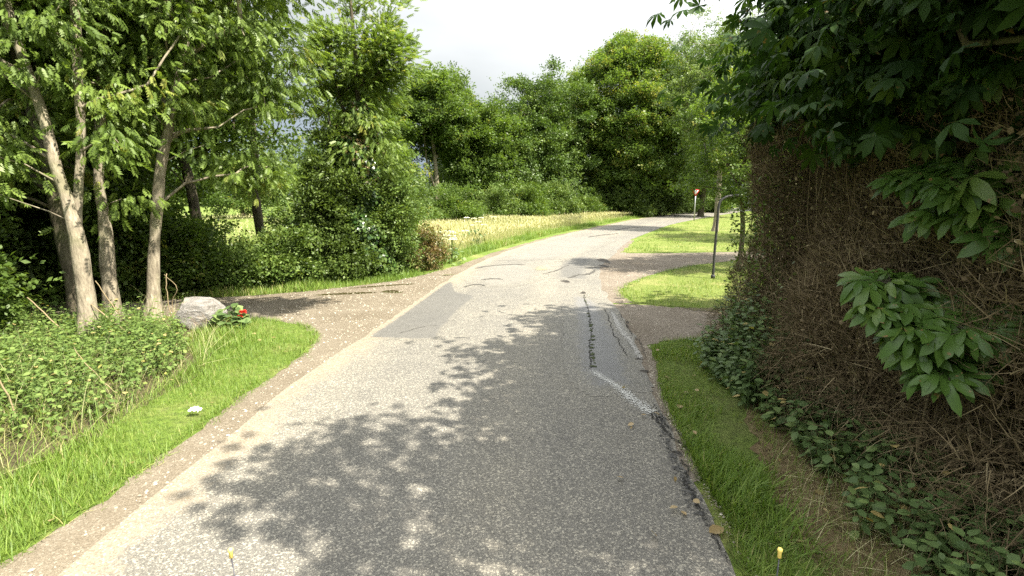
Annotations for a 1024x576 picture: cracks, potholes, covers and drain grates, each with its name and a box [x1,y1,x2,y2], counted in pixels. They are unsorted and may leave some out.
crack [583,296,646,368]
crack [650,413,730,564]
crack [543,265,595,278]
crack [464,264,522,287]
